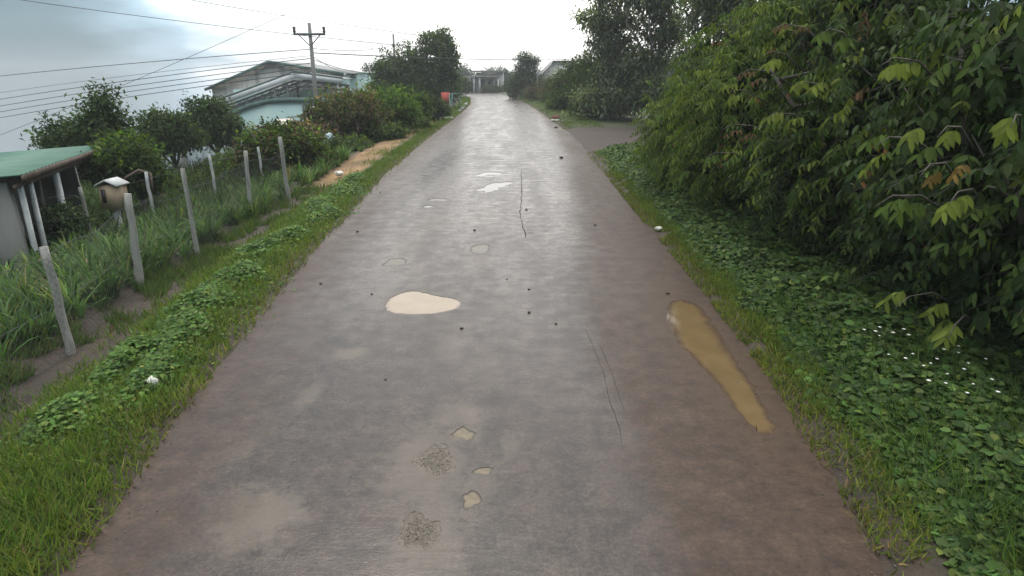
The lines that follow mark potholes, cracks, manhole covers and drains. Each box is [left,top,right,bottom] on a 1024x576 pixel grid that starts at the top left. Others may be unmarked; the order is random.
pothole [470,244,490,254]
pothole [382,258,407,266]
crack [519,171,532,238]
pothole [396,510,442,551]
pothole [411,442,458,479]
pothole [666,300,777,435]
crack [586,331,625,444]
